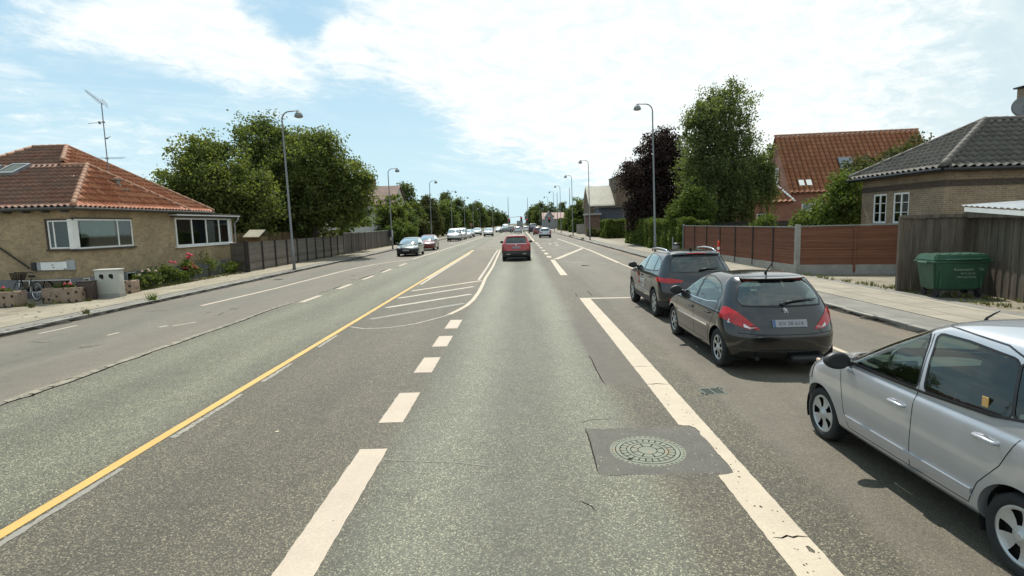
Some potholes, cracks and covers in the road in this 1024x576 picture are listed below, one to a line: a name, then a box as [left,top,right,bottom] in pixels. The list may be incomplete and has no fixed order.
drain grate [697,387,728,395]
manhole cover [610,436,686,466]
